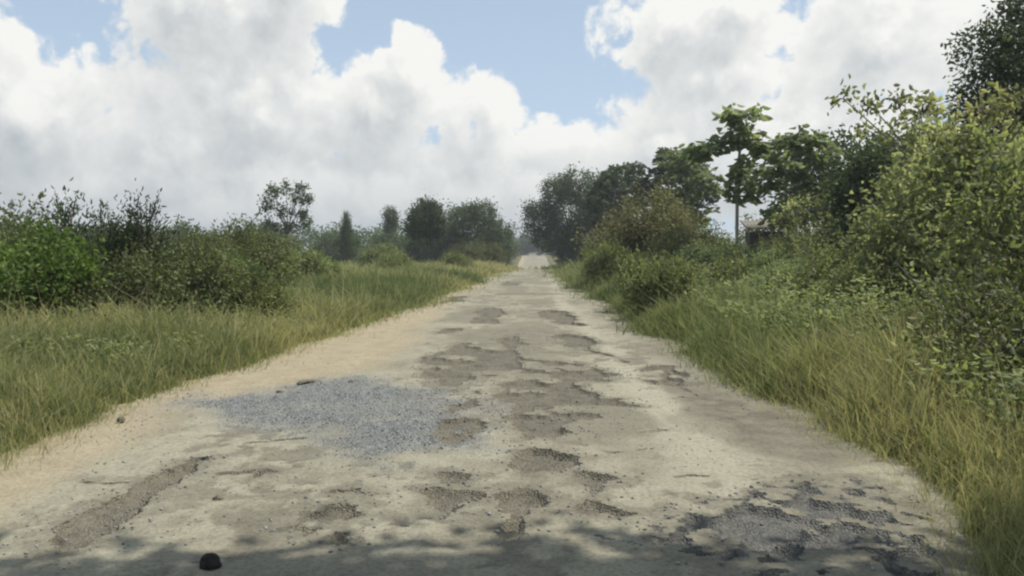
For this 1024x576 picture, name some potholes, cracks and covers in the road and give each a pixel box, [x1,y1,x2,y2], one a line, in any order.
pothole [651,476,941,576]
pothole [469,308,509,324]
pothole [419,487,487,516]
pothole [47,456,212,555]
pothole [575,500,638,517]
pothole [550,334,600,349]
pothole [419,342,641,440]
pothole [430,471,474,485]
pothole [428,398,489,451]
pothole [640,365,691,386]
pothole [492,486,552,541]
pothole [569,470,622,495]
